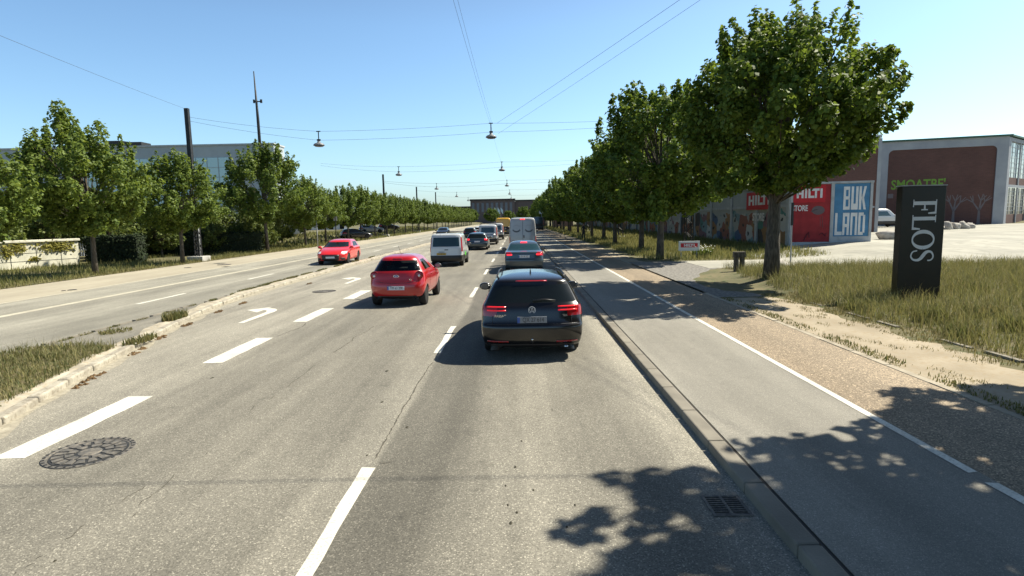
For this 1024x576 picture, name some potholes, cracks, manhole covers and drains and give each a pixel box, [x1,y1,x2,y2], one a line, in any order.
drain grate [701,495,754,517]
manhole cover [39,437,137,469]
